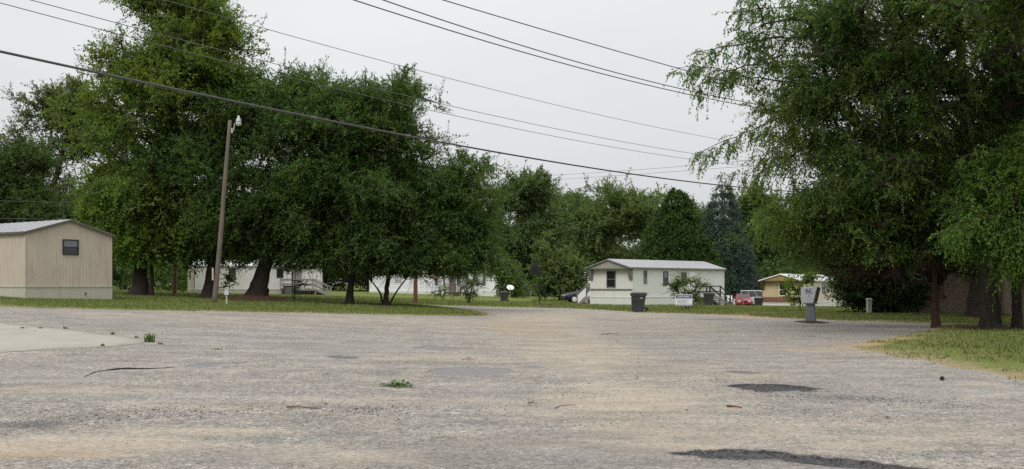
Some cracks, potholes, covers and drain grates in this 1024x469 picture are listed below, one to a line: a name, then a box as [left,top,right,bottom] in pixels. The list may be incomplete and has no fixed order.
crack [84,359,282,377]
